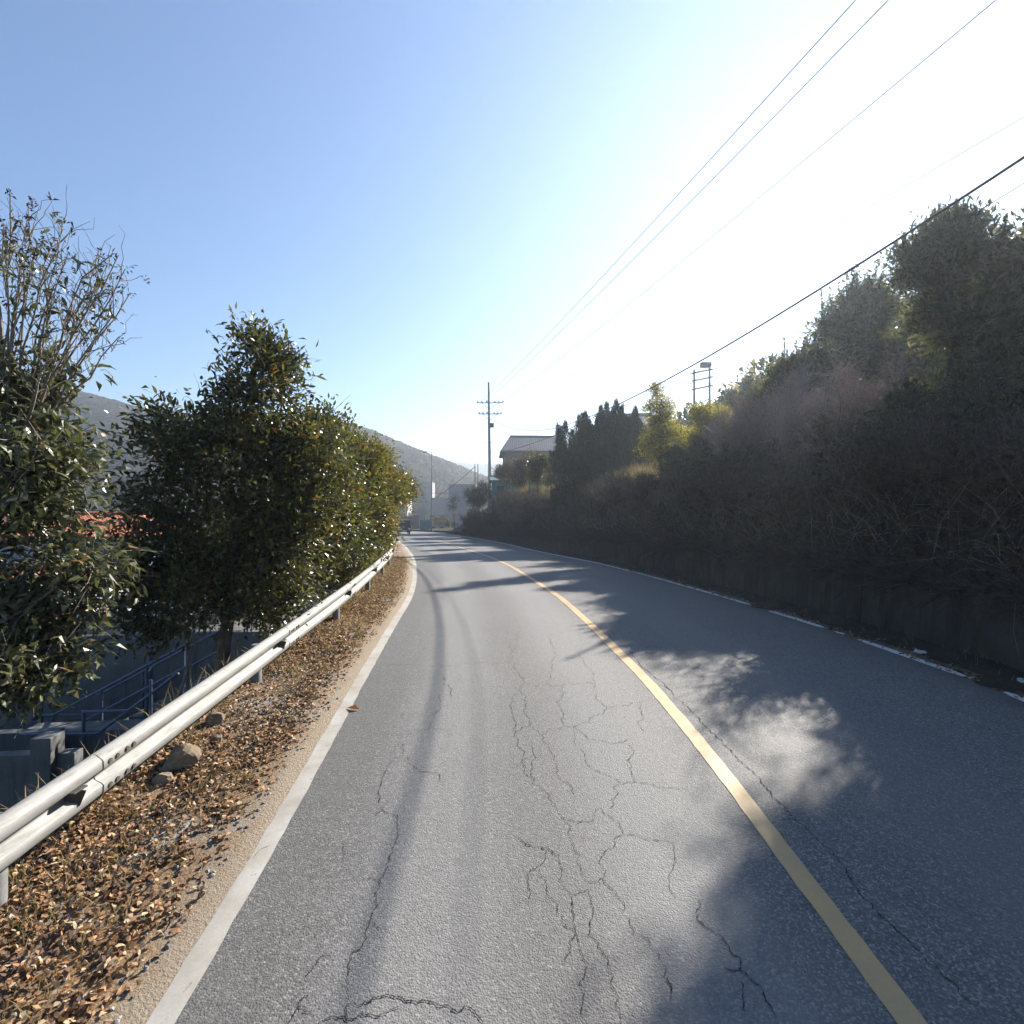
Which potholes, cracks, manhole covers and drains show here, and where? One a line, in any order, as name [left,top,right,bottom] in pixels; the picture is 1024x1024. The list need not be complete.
crack [290,994,483,1024]
crack [509,640,775,1021]
crack [306,725,431,994]
